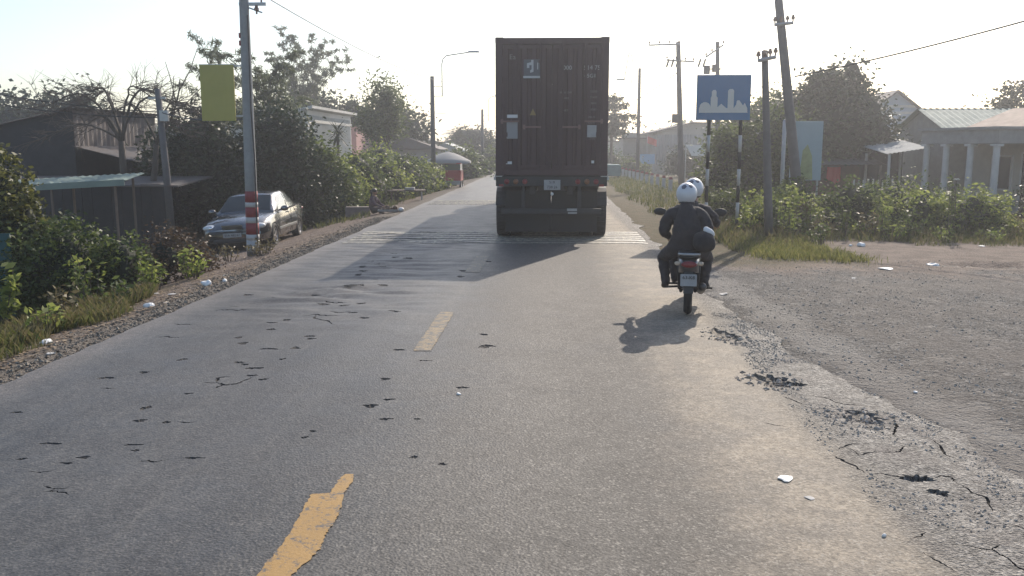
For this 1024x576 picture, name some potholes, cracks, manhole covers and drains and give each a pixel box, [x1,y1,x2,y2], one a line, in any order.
pothole [706,327,741,341]
pothole [839,409,885,428]
crack [31,470,68,494]
crack [835,421,906,480]
crack [914,524,1024,570]
crack [203,376,254,388]
crack [307,301,350,325]
pothole [744,374,798,388]
crack [933,440,993,512]
